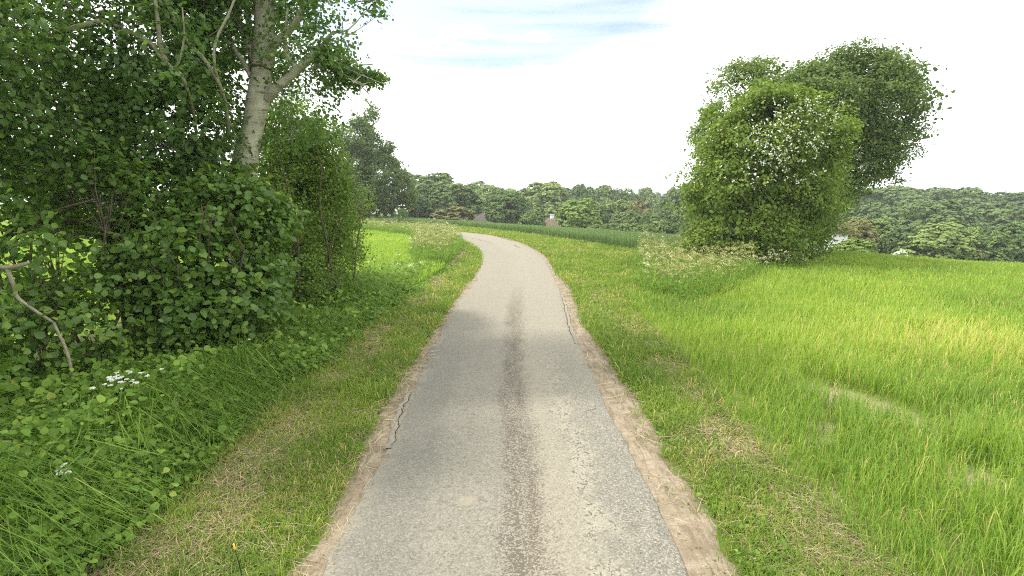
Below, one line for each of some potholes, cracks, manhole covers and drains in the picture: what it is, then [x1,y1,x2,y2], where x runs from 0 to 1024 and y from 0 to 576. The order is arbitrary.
crack [385,391,416,449]
crack [559,295,578,344]
